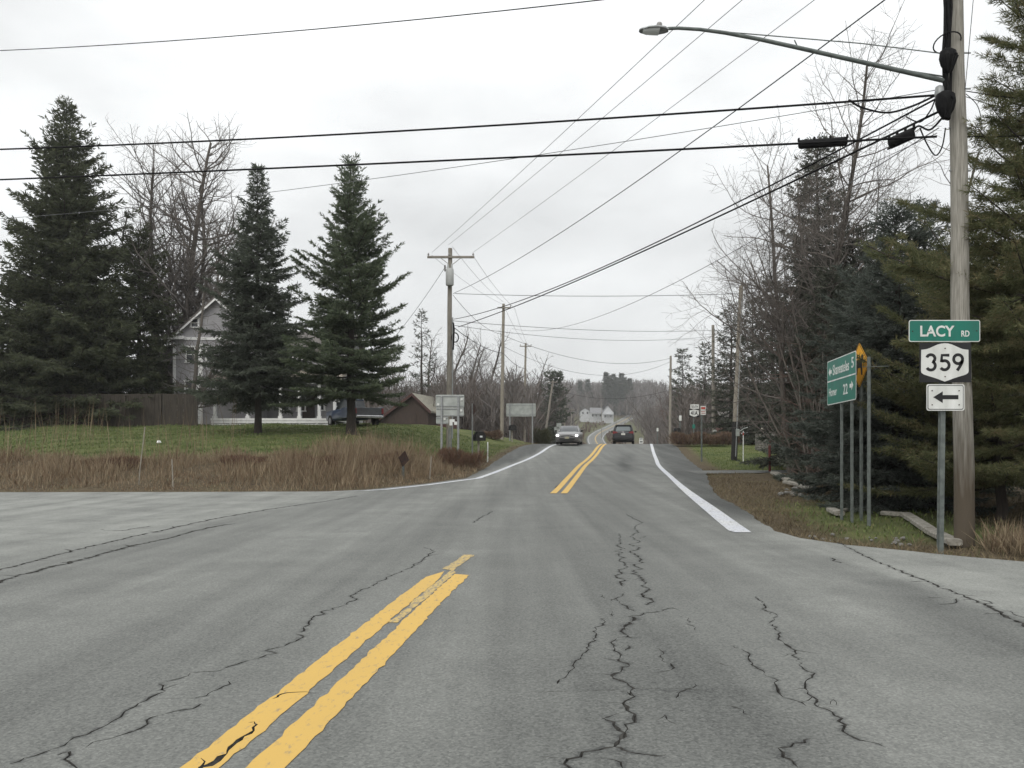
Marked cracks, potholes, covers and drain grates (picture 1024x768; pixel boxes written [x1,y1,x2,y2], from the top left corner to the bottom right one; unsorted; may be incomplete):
crack [720,597,882,746]
crack [778,739,807,766]
crack [11,548,435,768]
crack [550,515,688,768]
